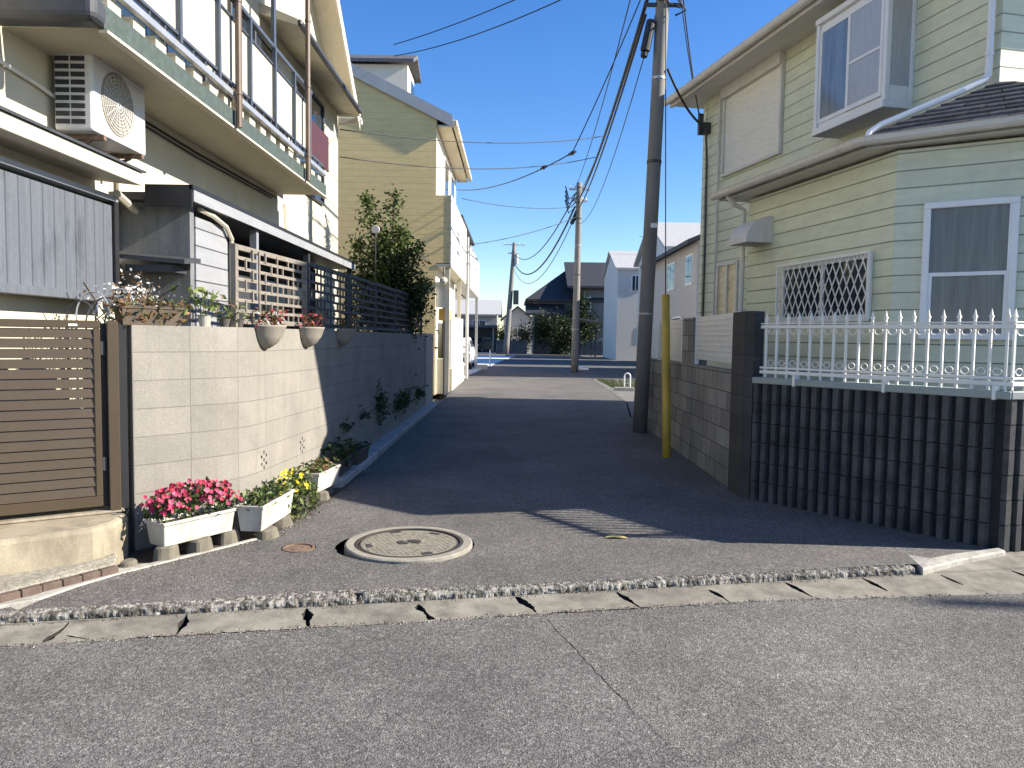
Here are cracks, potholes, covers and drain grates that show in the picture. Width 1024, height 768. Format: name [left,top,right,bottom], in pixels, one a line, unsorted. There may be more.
manhole cover [338,526,473,564]
crack [547,619,678,756]
utility cover [282,543,315,553]
